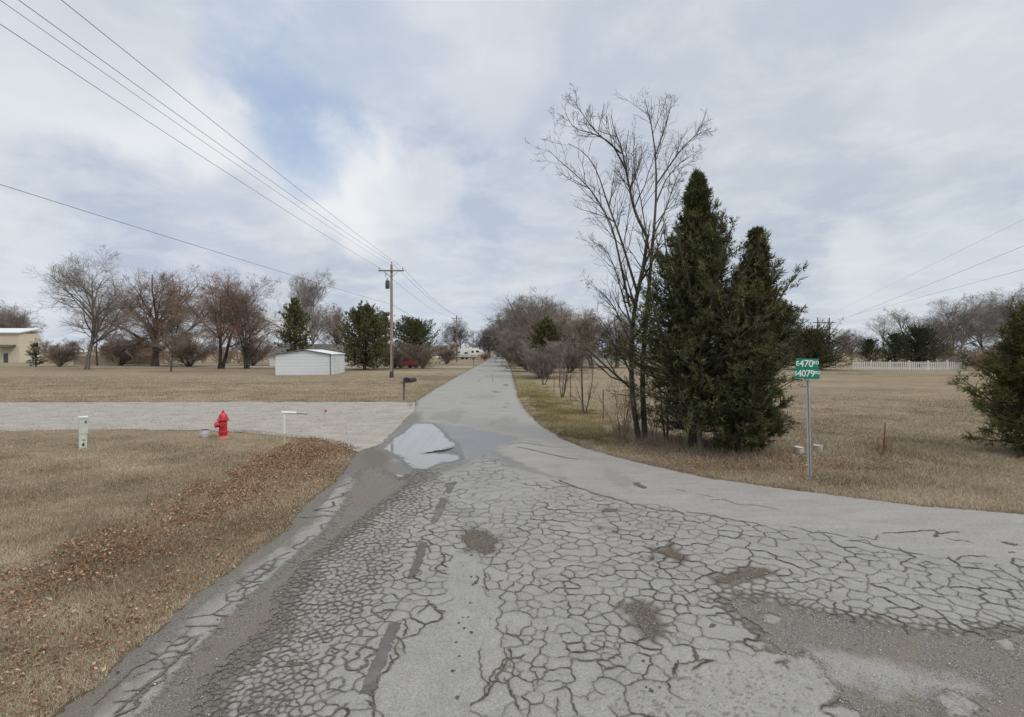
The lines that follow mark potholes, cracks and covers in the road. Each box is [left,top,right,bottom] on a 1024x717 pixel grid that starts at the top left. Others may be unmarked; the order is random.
crack [93,455,1024,717]
pothole [625,602,659,638]
pothole [715,567,772,583]
pothole [653,545,683,560]
pothole [460,529,503,556]
